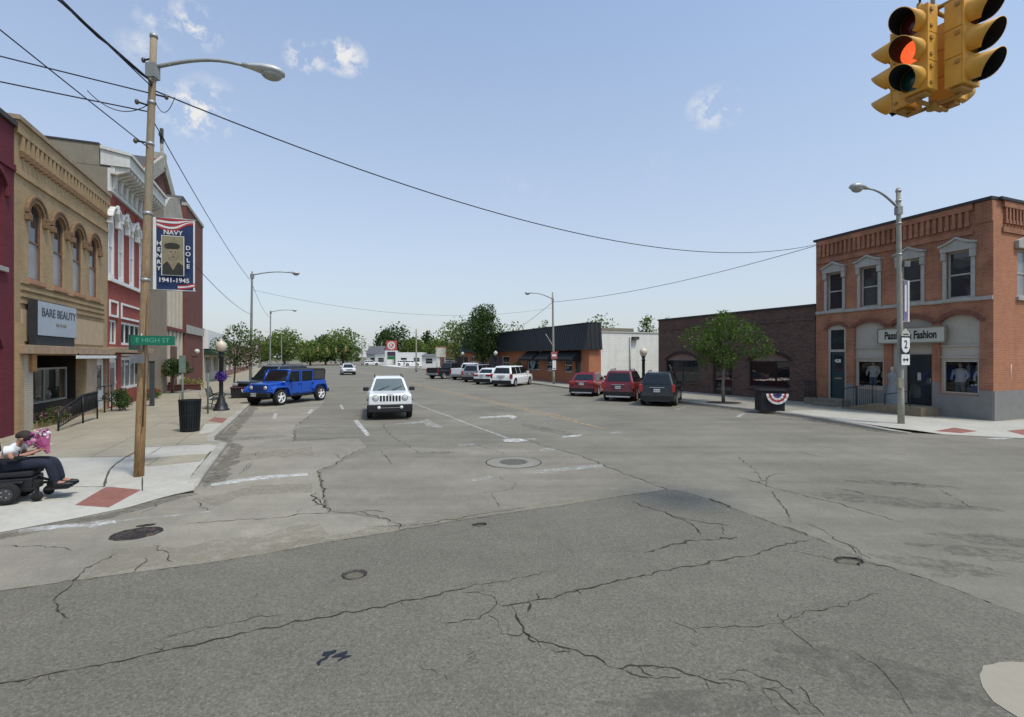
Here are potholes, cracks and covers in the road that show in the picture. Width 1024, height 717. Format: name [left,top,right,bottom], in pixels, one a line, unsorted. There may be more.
manhole cover [108,526,164,541]
utility cover [341,569,367,580]
manhole cover [486,457,542,468]
crack [856,653,911,711]
crack [0,459,892,715]
